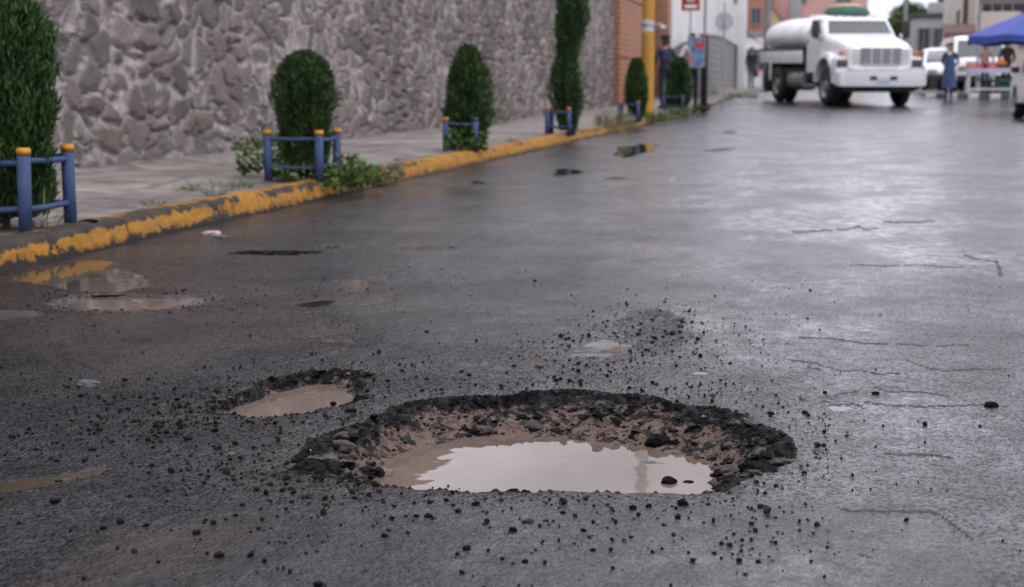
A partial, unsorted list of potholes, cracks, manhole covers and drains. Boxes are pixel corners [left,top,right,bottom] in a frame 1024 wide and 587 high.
crack [849,254,1004,277]
pothole [281,388,798,495]
pothole [202,369,377,418]
crack [837,506,974,541]
pothole [555,337,638,365]
crack [789,337,1009,410]
crack [792,220,935,233]
pothole [39,292,227,313]
